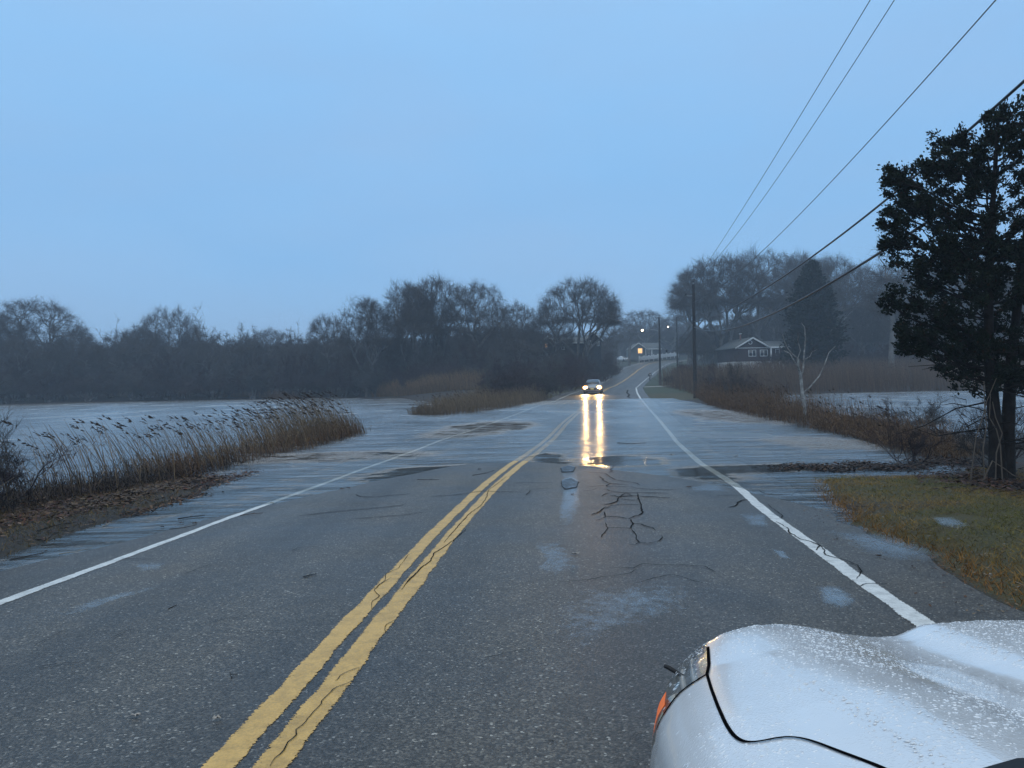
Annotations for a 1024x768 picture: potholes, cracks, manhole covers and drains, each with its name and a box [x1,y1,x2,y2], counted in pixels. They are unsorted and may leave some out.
crack [301,494,423,519]
pothole [561,478,579,490]
crack [562,563,712,583]
crack [716,490,888,586]
crack [586,465,670,544]
crack [371,479,550,632]
crack [270,666,364,766]
